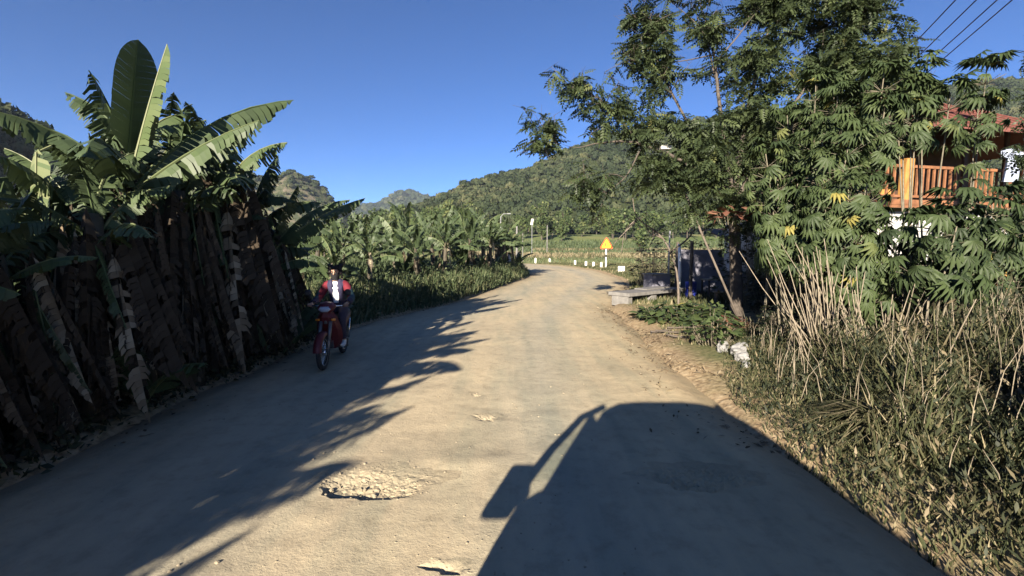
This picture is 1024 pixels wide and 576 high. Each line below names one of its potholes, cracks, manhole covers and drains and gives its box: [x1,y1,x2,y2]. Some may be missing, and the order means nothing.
pothole [622,461,773,494]
pothole [471,412,508,422]
pothole [317,461,464,501]
pothole [416,556,475,575]
